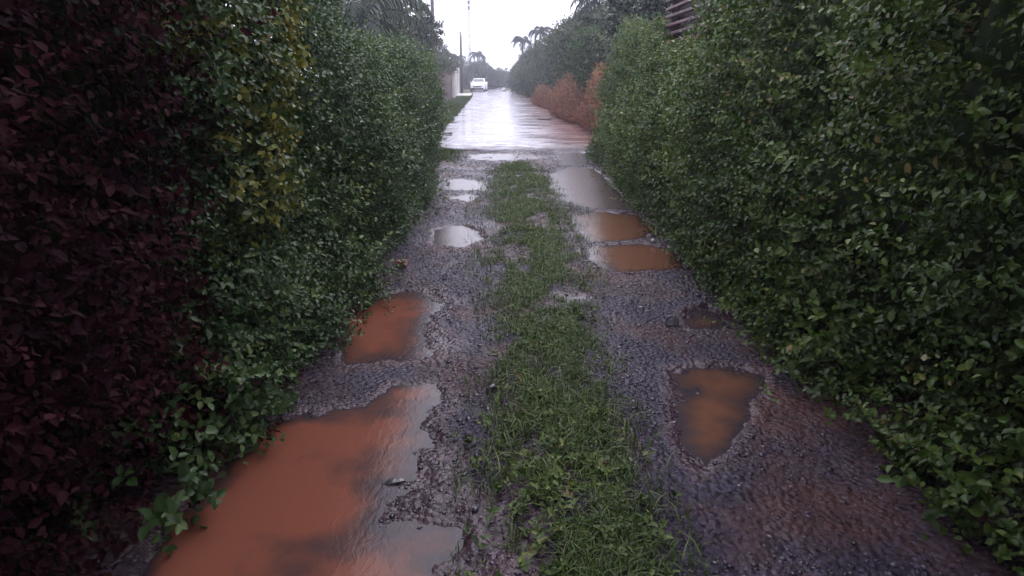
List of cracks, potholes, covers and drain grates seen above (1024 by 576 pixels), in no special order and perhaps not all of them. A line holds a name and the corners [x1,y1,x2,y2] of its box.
pothole [656,359,785,483]
pothole [318,287,465,368]
pothole [537,166,637,211]
pothole [424,223,494,249]
pothole [436,177,495,192]
pothole [557,209,660,243]
pothole [674,300,748,332]
pothole [575,240,693,274]
pothole [119,379,554,576]
